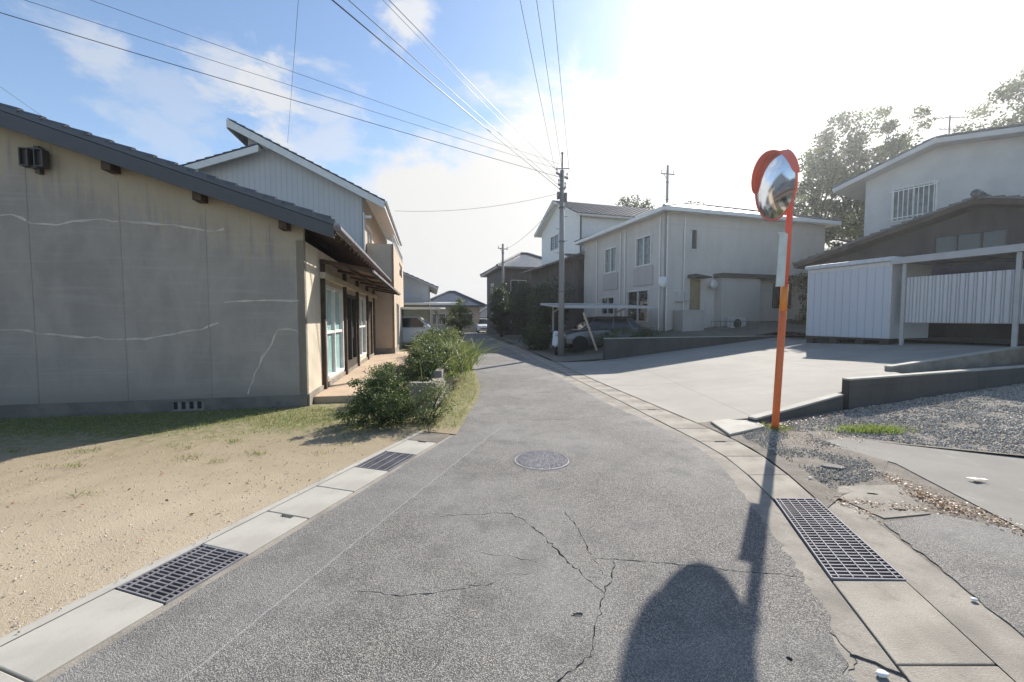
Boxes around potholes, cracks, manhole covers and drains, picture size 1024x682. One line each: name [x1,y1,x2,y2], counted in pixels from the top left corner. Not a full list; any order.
drain grate [774,498,906,584]
drain grate [117,544,246,606]
crack [442,512,794,682]
crack [850,654,907,679]
crack [353,583,492,596]
manhole cover [510,450,574,472]
drain grate [355,451,416,472]
